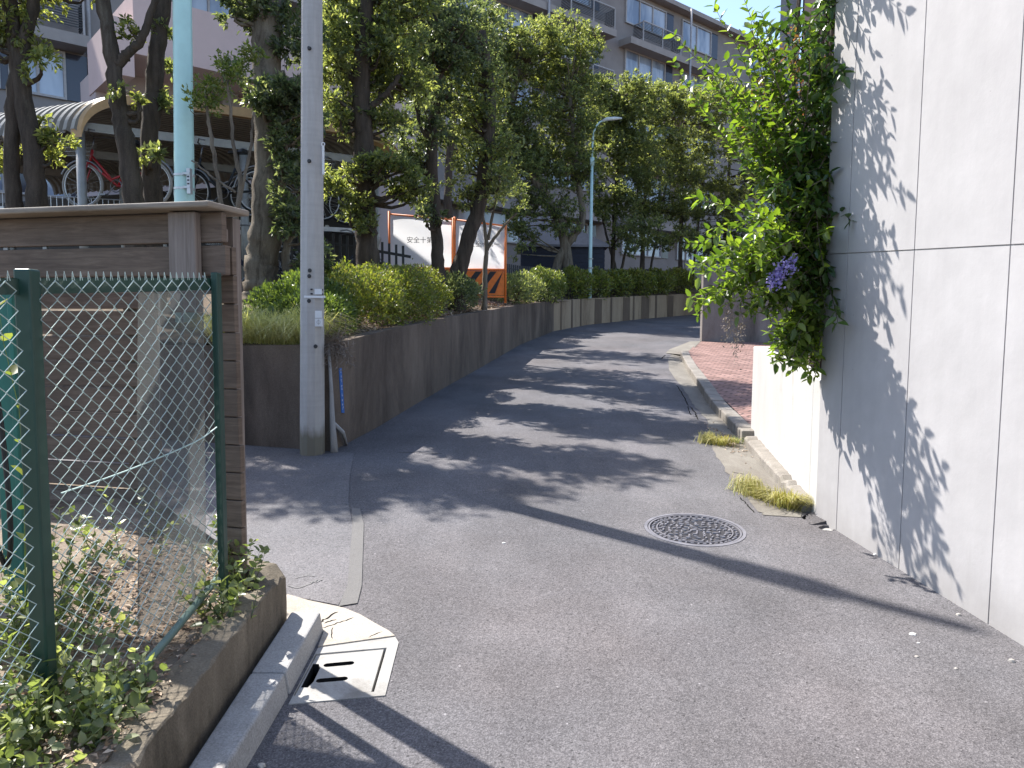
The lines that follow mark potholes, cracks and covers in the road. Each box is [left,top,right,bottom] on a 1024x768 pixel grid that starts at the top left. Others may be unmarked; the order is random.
manhole cover [644,513,746,547]
crack [321,612,354,639]
